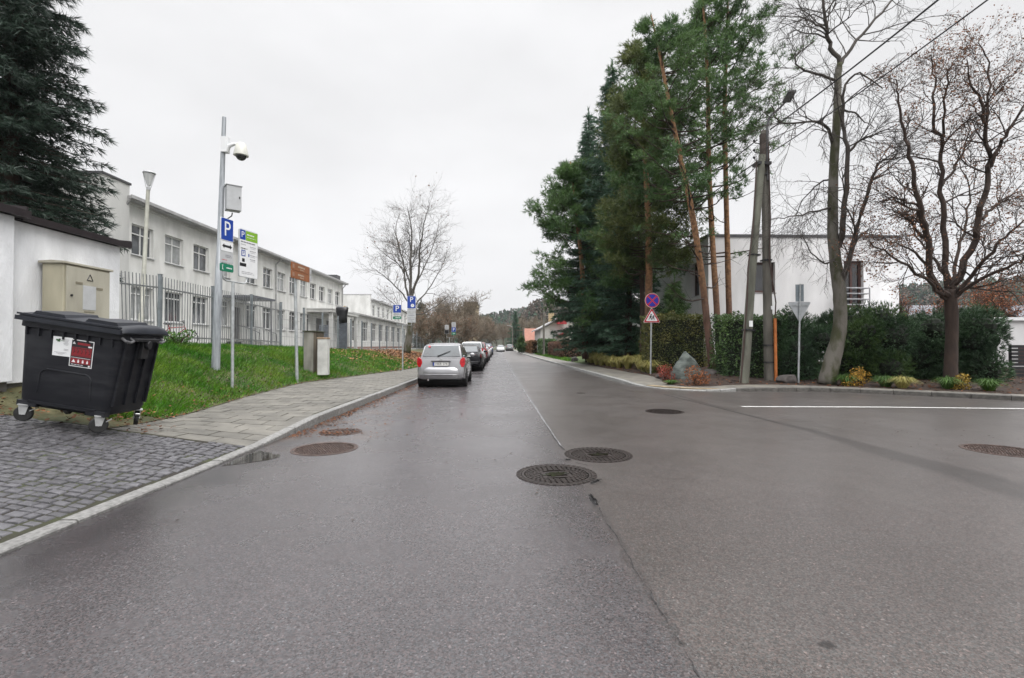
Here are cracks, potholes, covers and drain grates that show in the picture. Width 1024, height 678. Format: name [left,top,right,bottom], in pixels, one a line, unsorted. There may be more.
manhole cover [564,447,633,463]
manhole cover [290,442,358,456]
crack [599,507,700,678]
manhole cover [516,464,597,486]
manhole cover [319,428,362,436]
manhole cover [958,444,1024,458]
